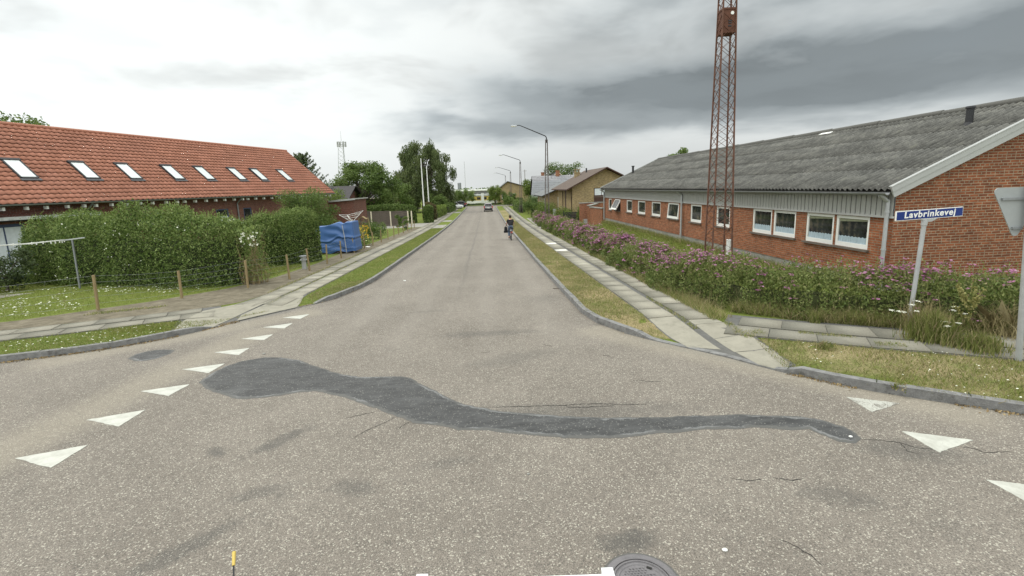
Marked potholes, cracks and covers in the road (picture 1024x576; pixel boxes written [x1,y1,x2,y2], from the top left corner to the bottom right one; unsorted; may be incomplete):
manhole cover [604,553,679,576]
